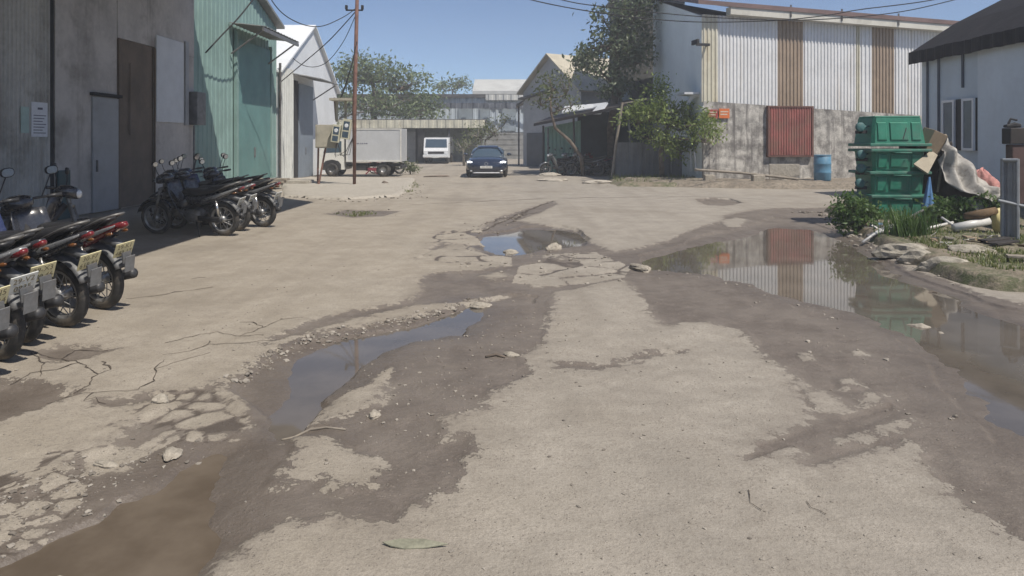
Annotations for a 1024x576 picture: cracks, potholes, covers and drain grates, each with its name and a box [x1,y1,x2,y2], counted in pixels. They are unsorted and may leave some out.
pothole [638,216,1024,462]
pothole [0,440,242,576]
crack [422,201,628,283]
pothole [476,224,591,256]
crack [0,317,297,561]
pothole [695,197,741,206]
pothole [230,292,540,441]
